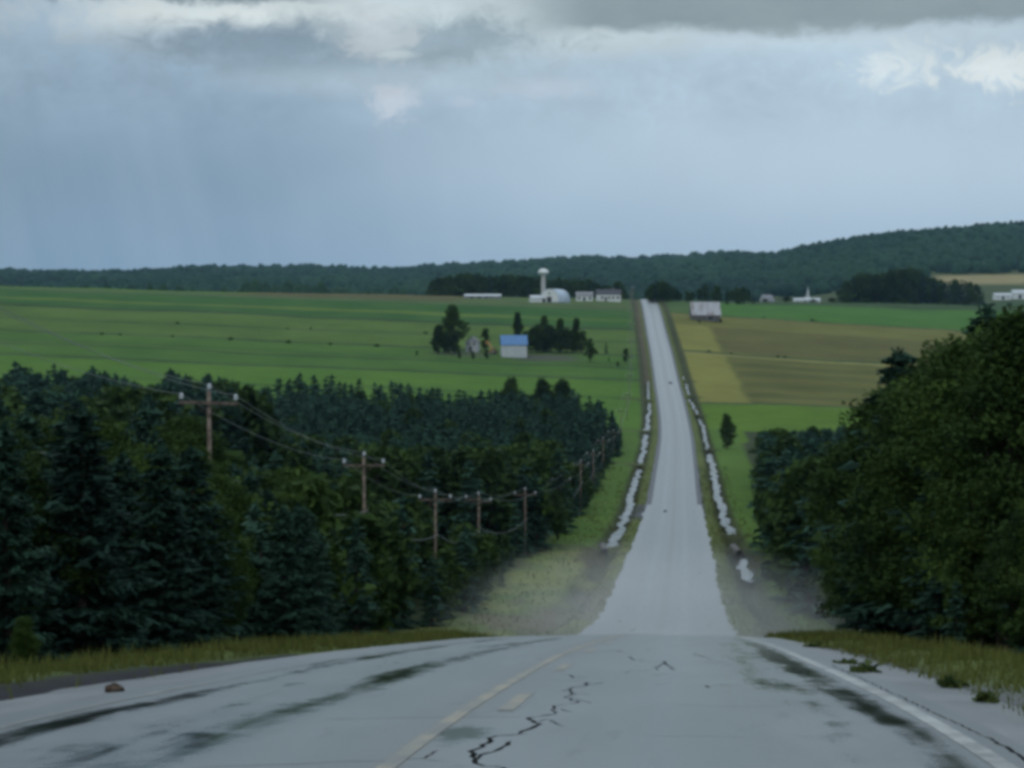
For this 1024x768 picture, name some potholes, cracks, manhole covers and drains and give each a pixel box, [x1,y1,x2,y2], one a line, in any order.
crack [366,649,790,768]
